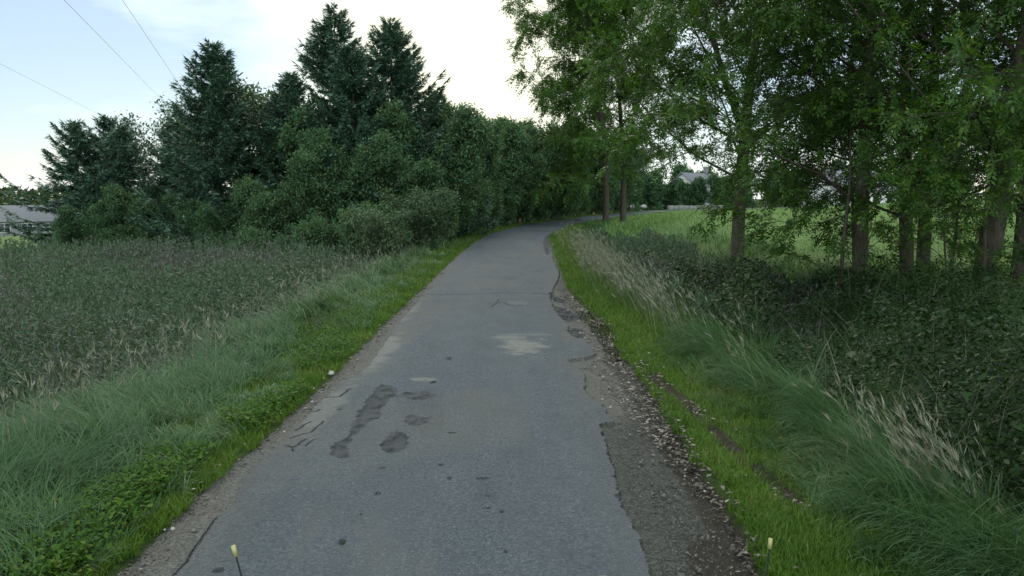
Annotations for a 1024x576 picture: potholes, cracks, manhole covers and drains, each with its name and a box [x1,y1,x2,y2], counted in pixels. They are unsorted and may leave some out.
crack [172,516,220,575]
crack [286,389,351,451]
crack [418,293,548,307]
